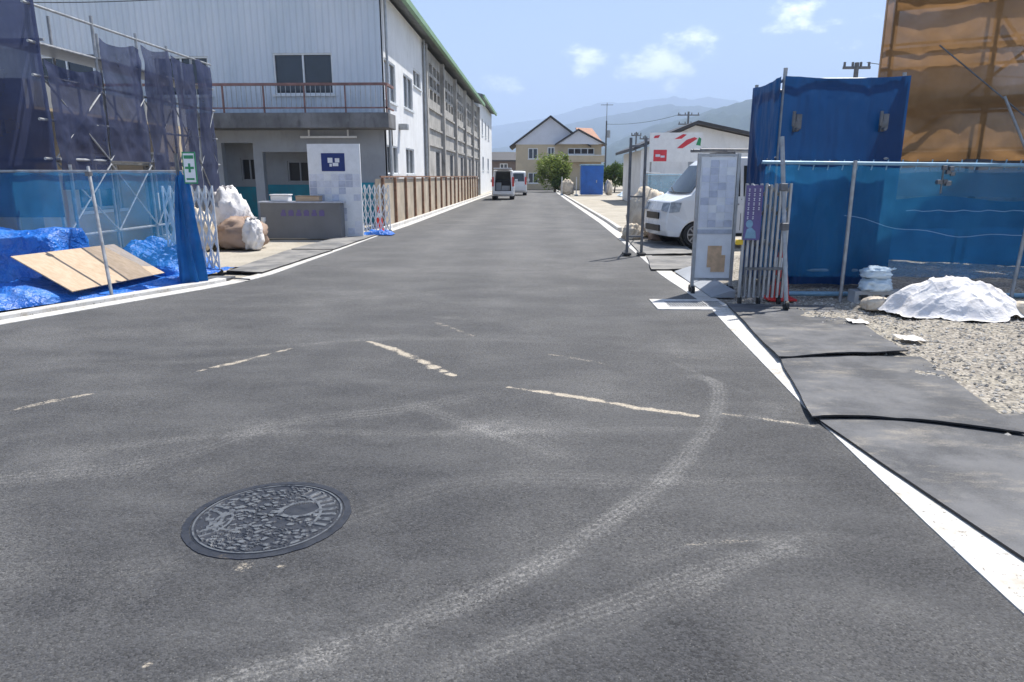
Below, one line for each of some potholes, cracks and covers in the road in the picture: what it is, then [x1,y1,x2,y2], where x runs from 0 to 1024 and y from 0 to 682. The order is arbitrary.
drain grate [649,299,730,310]
manhole cover [181,482,352,560]
